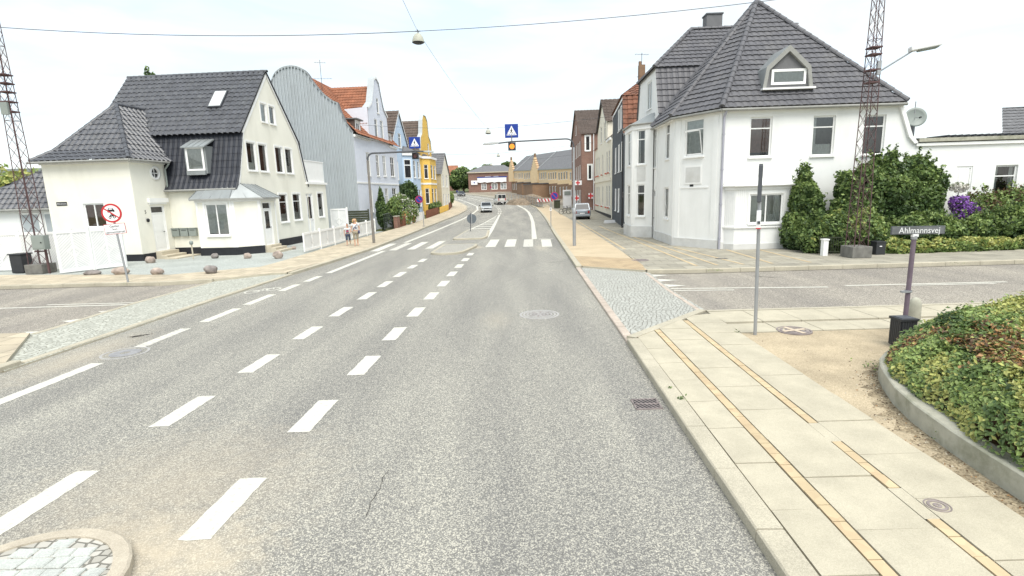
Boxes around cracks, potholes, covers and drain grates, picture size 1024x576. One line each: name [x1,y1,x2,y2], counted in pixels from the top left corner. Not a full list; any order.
manhole cover [923,498,953,513]
manhole cover [99,347,150,359]
manhole cover [776,326,813,336]
manhole cover [520,310,559,319]
drain grate [630,398,663,410]
